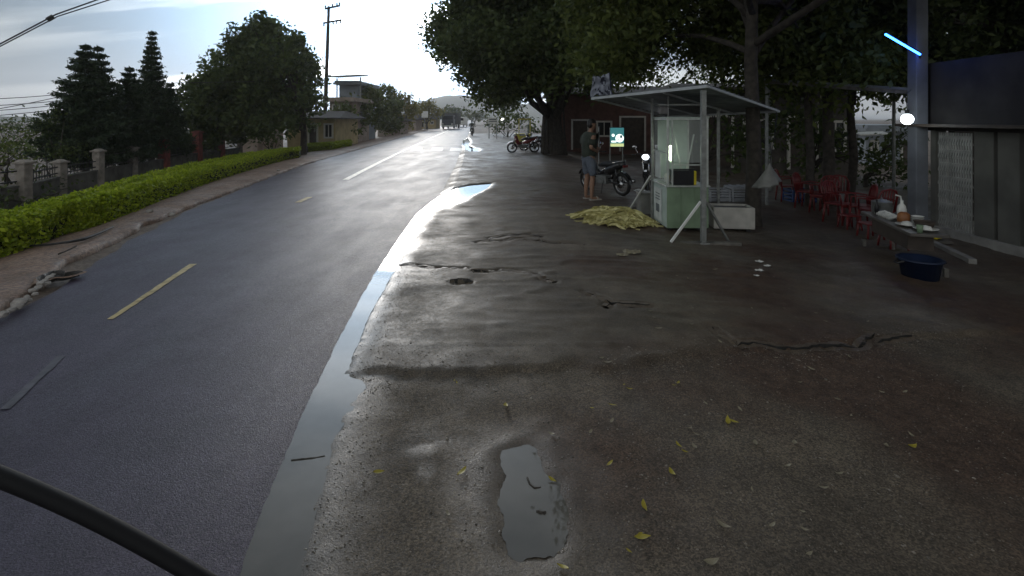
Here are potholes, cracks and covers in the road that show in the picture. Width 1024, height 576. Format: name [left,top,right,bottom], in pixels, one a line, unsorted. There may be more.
crack [477,233,584,245]
crack [580,291,652,309]
crack [706,326,916,354]
crack [488,269,557,283]
